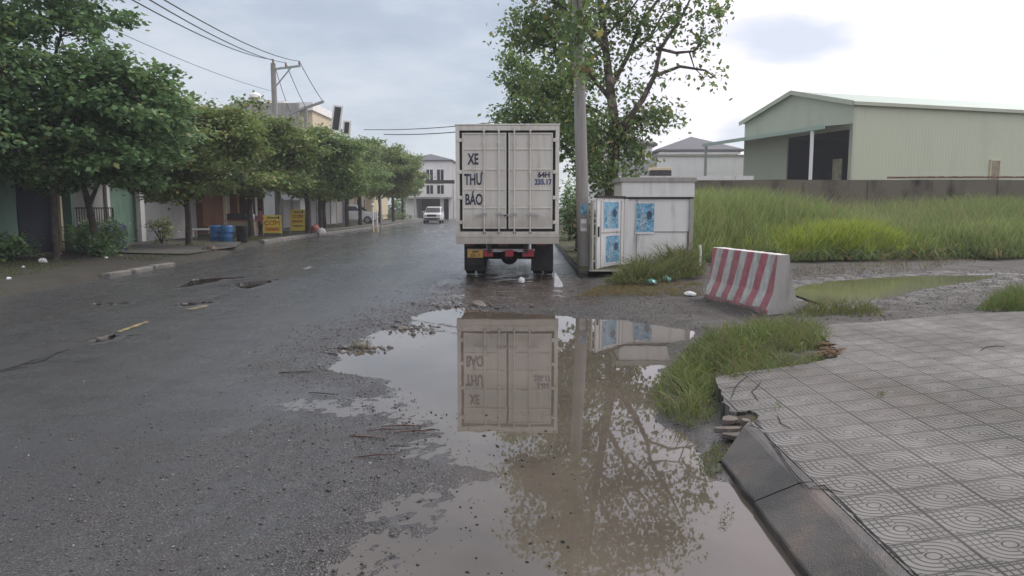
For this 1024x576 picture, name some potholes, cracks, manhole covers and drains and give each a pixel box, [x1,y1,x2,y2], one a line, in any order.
crack [0,348,70,372]
pothole [80,333,128,345]
pothole [169,276,252,289]
pothole [229,280,277,289]
crack [724,377,760,400]
